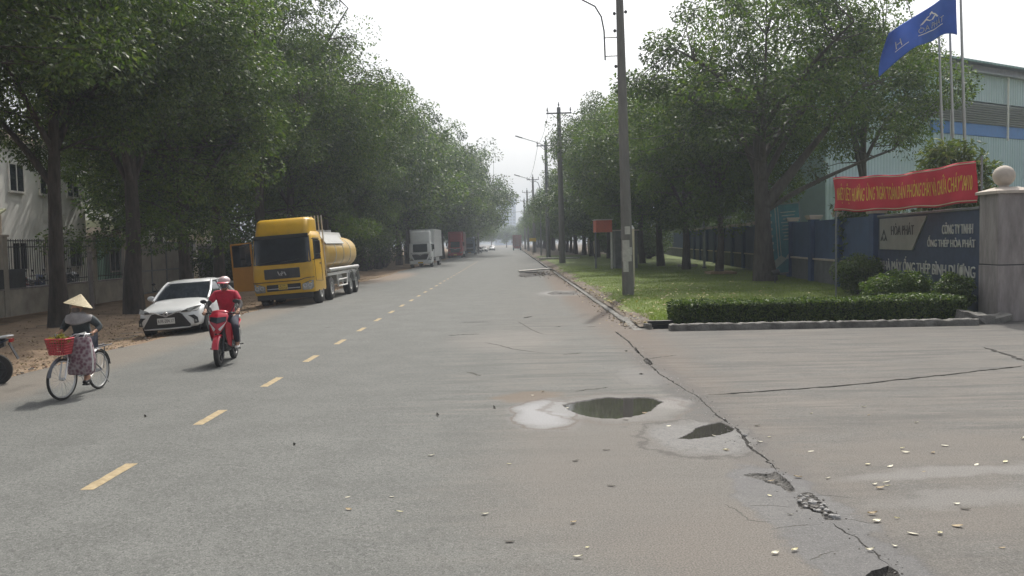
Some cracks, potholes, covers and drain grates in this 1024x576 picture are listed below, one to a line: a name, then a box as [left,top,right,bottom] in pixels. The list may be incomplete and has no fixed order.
crack [640,347,1024,469]
pothole [796,492,837,520]
pothole [562,397,663,419]
crack [810,519,890,566]
crack [725,504,807,529]
pothole [743,471,795,493]
crack [449,317,561,353]
pothole [866,566,901,576]
pothole [678,422,735,439]
